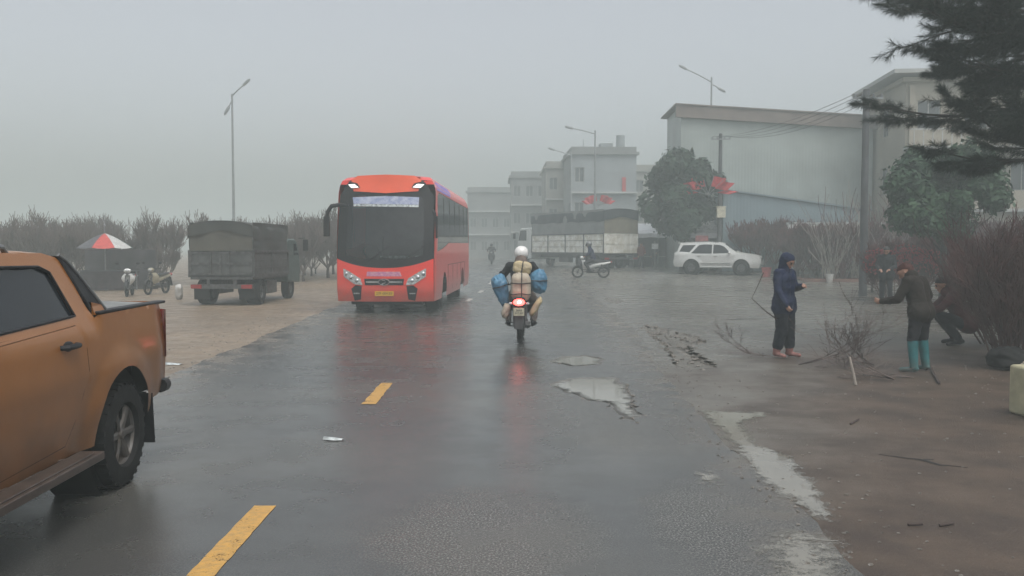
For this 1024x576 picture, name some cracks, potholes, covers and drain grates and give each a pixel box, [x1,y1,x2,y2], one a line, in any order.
pothole [550,355,605,366]
pothole [550,377,647,423]
